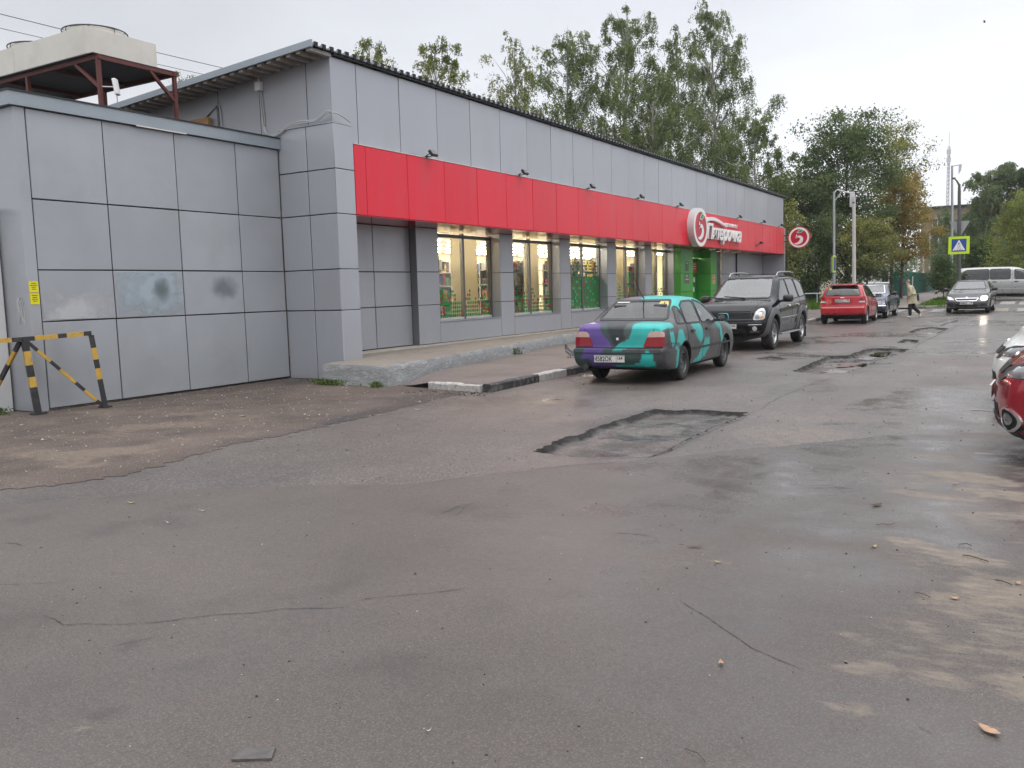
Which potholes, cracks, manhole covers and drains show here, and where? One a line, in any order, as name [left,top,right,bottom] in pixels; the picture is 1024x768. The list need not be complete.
pothole [910,327,949,335]
pothole [533,409,748,458]
crack [682,601,798,667]
crack [43,588,462,645]
pothole [793,348,908,374]
